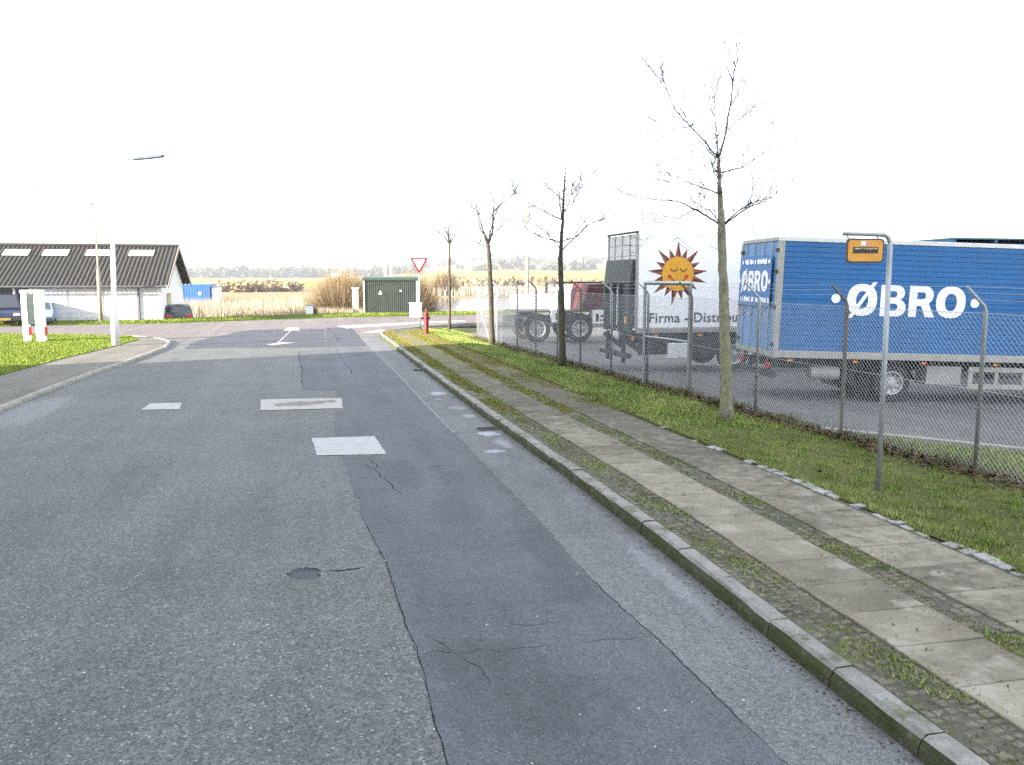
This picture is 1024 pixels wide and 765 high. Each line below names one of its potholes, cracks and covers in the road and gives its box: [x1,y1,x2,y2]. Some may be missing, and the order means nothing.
crack [428,638,556,685]
pothole [286,567,321,580]
